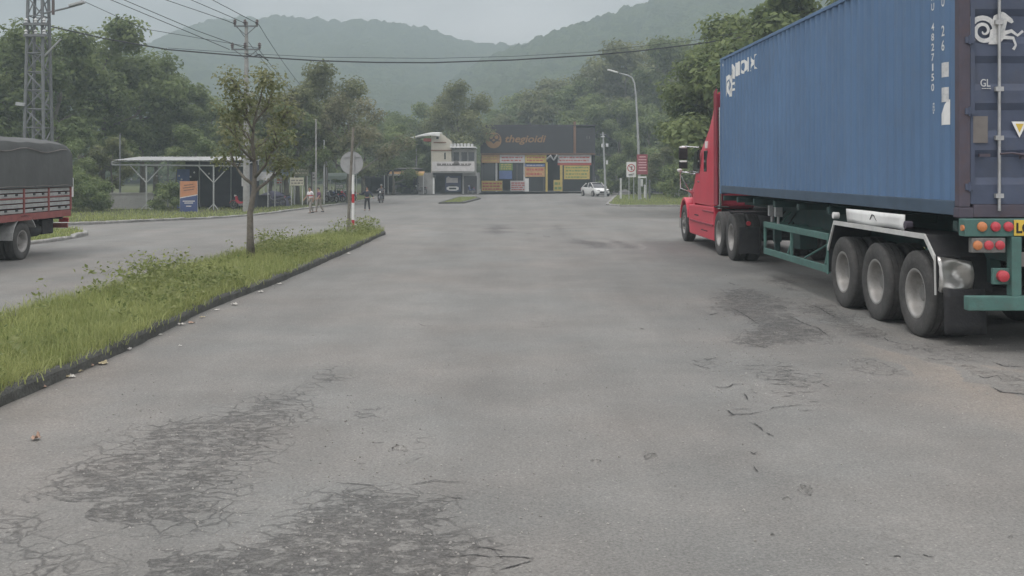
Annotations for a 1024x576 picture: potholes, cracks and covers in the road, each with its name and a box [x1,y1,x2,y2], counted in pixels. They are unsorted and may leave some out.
crack [716,343,829,471]
crack [448,547,532,570]
